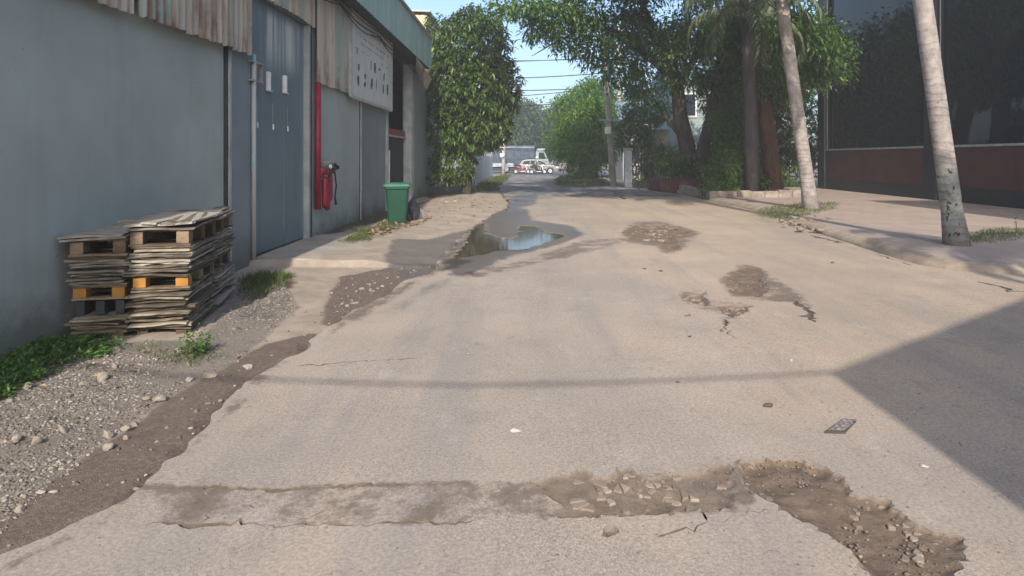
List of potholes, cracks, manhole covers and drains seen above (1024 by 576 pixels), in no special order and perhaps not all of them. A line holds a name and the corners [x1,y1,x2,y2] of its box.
crack [600,509,771,537]
pothole [619,225,693,250]
pothole [446,222,565,259]
pothole [734,456,968,576]
crack [975,281,1024,292]
pothole [714,305,754,318]
pothole [529,462,741,519]
pothole [724,266,770,297]
pothole [681,292,712,307]
crack [299,358,414,366]
